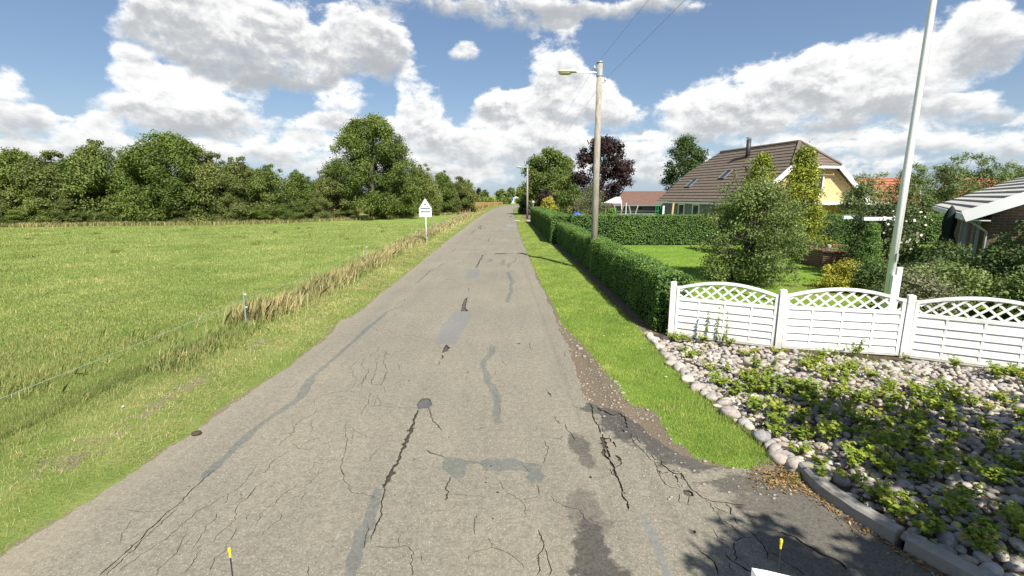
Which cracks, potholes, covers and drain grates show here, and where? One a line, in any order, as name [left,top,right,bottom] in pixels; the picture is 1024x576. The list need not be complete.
pothole [417,398,432,410]
crack [100,316,442,575]
crack [445,404,805,575]
